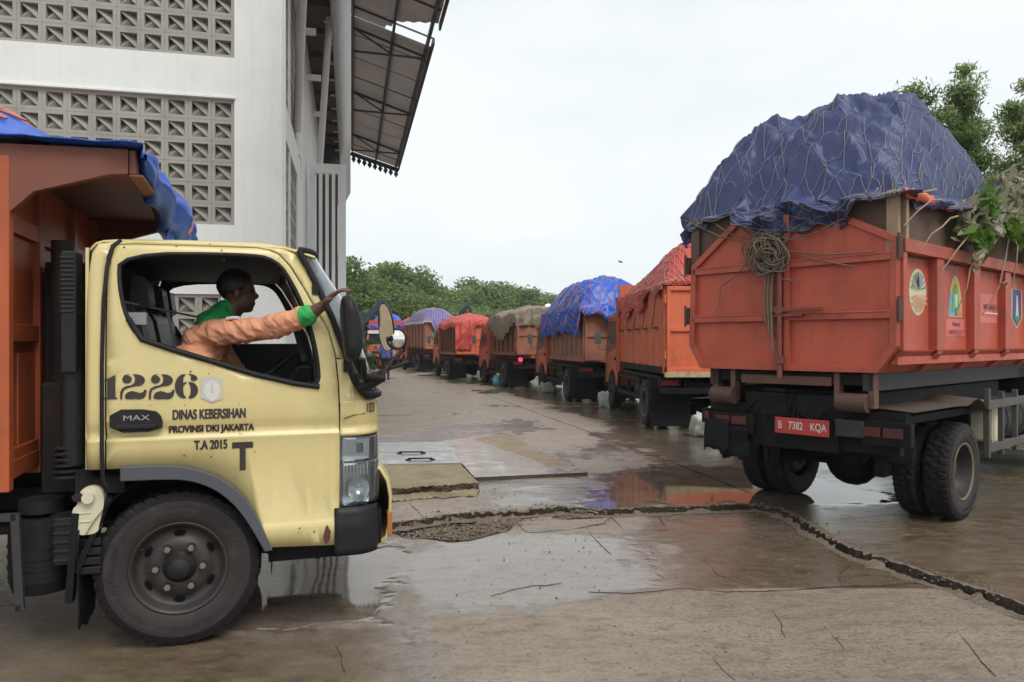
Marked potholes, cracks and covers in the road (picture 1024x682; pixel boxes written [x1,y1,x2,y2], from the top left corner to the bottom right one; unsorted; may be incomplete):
manhole cover [379,451,462,466]
crack [392,504,1024,677]
manhole cover [379,442,452,452]
pothole [392,516,536,543]
